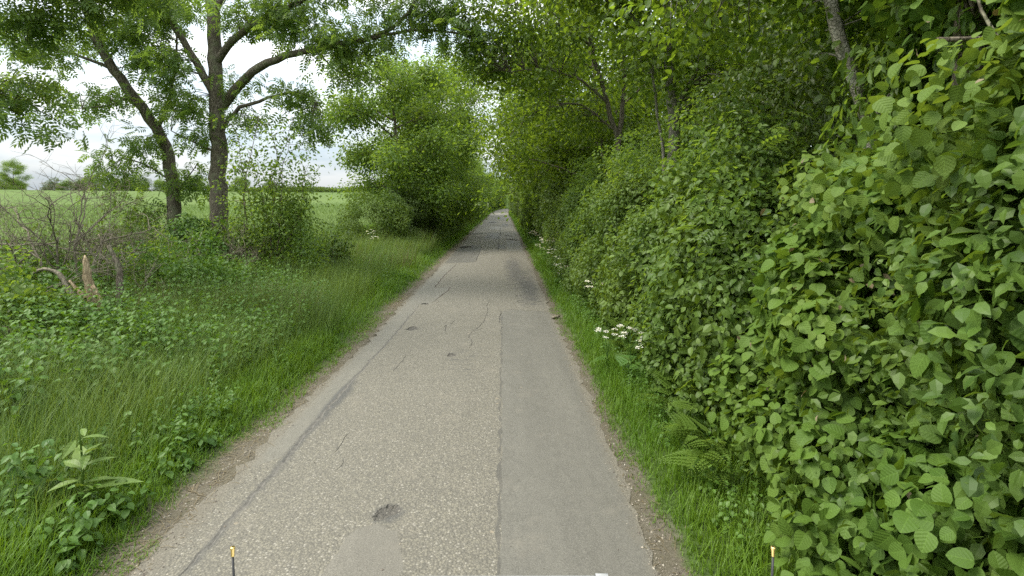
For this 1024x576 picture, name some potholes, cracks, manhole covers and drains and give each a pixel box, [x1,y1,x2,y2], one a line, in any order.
pothole [372,503,402,521]
